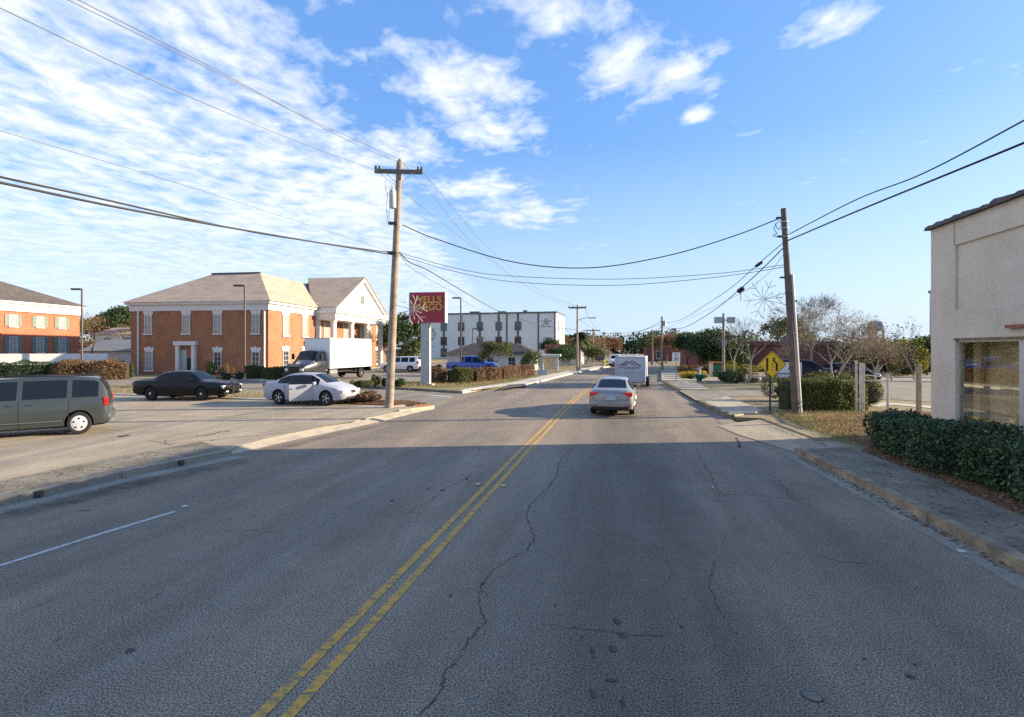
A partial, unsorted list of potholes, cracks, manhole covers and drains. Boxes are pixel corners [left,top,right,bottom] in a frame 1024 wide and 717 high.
crack [543,624,660,636]
crack [415,448,572,717]
crack [699,437,805,499]
